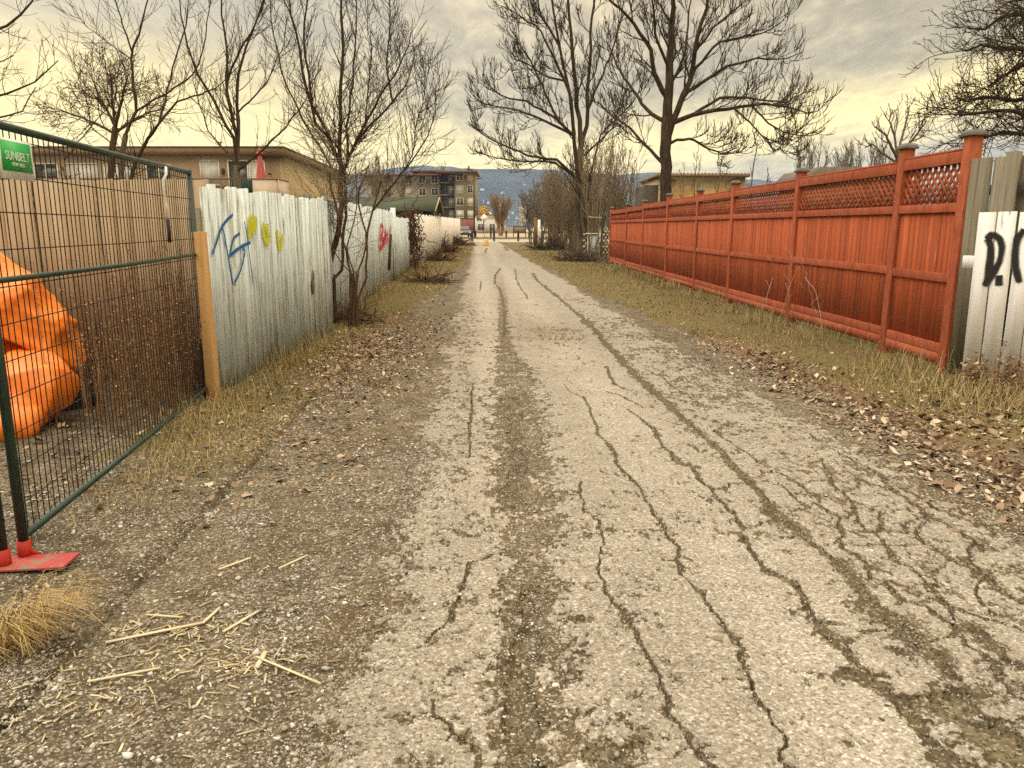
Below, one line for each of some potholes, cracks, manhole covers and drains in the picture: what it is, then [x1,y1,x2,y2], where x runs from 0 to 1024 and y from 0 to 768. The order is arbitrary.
crack [463,383,474,458]
crack [430,699,482,768]
crack [425,557,492,643]
crack [564,366,1024,768]
